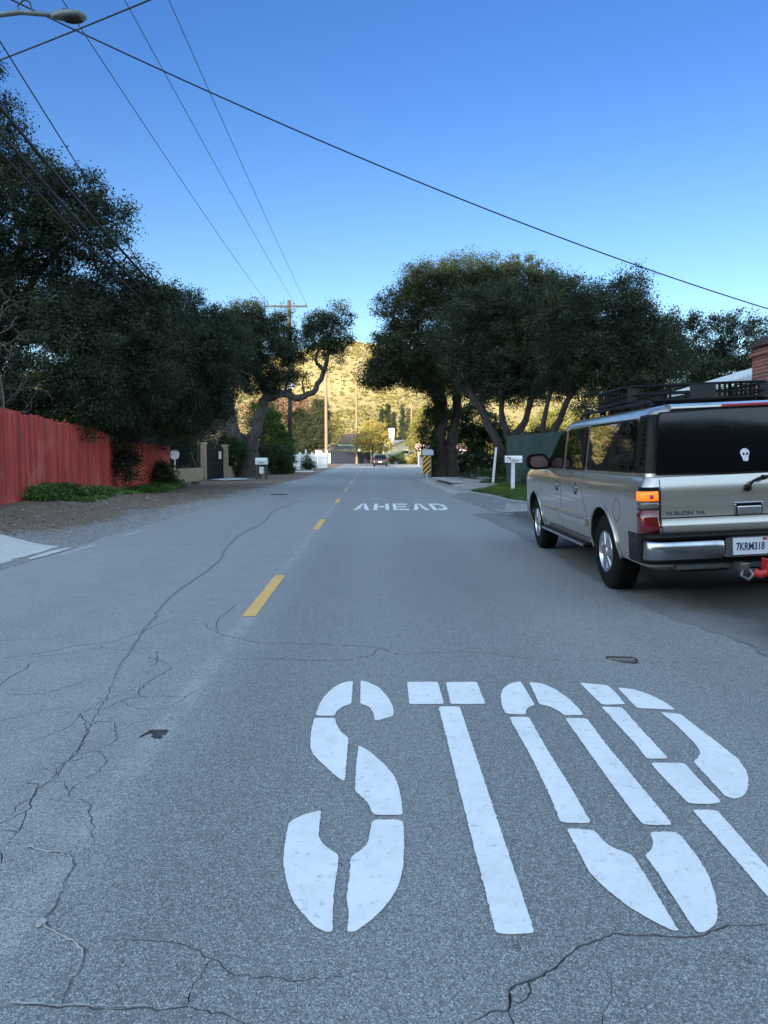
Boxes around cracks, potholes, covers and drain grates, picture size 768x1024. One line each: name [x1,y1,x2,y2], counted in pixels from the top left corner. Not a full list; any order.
pothole [139,729,168,739]
crack [204,607,601,661]
pothole [606,656,639,664]
crack [469,924,768,1024]
crack [0,618,376,1024]
